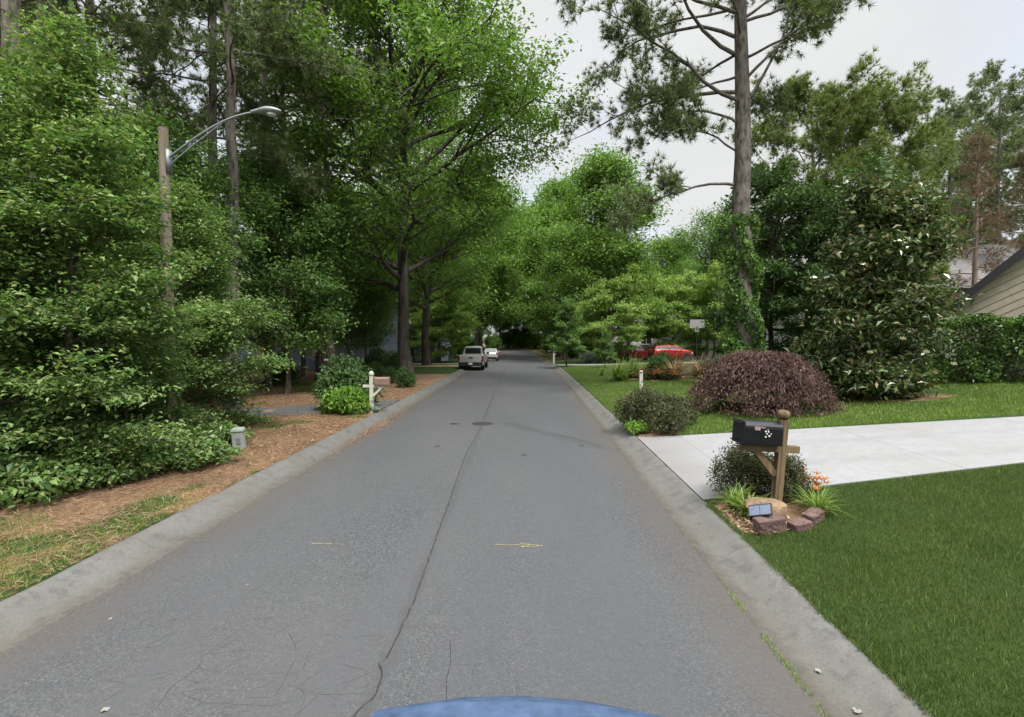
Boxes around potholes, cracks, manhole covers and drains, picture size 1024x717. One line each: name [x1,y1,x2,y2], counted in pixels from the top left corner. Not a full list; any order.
crack [57,371,602,717]
